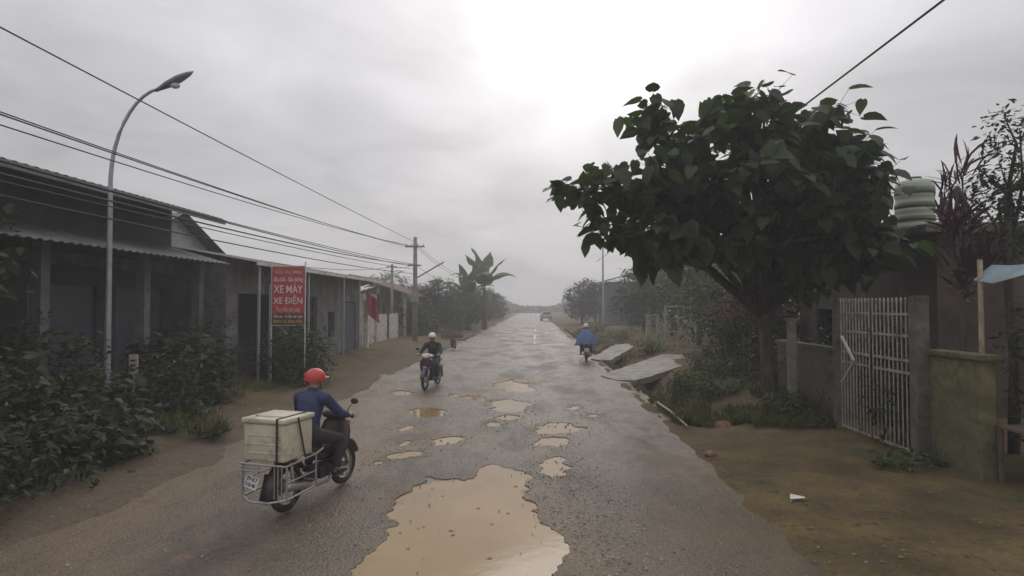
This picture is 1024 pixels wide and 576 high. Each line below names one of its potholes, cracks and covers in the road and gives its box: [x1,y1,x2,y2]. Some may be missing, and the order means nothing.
pothole [535,422,588,434]
pothole [409,408,448,418]
pothole [538,456,574,477]
pothole [530,436,569,447]
pothole [490,398,533,413]
pothole [386,451,424,459]
pothole [432,436,465,446]
pothole [350,464,570,576]
pothole [492,379,537,392]
